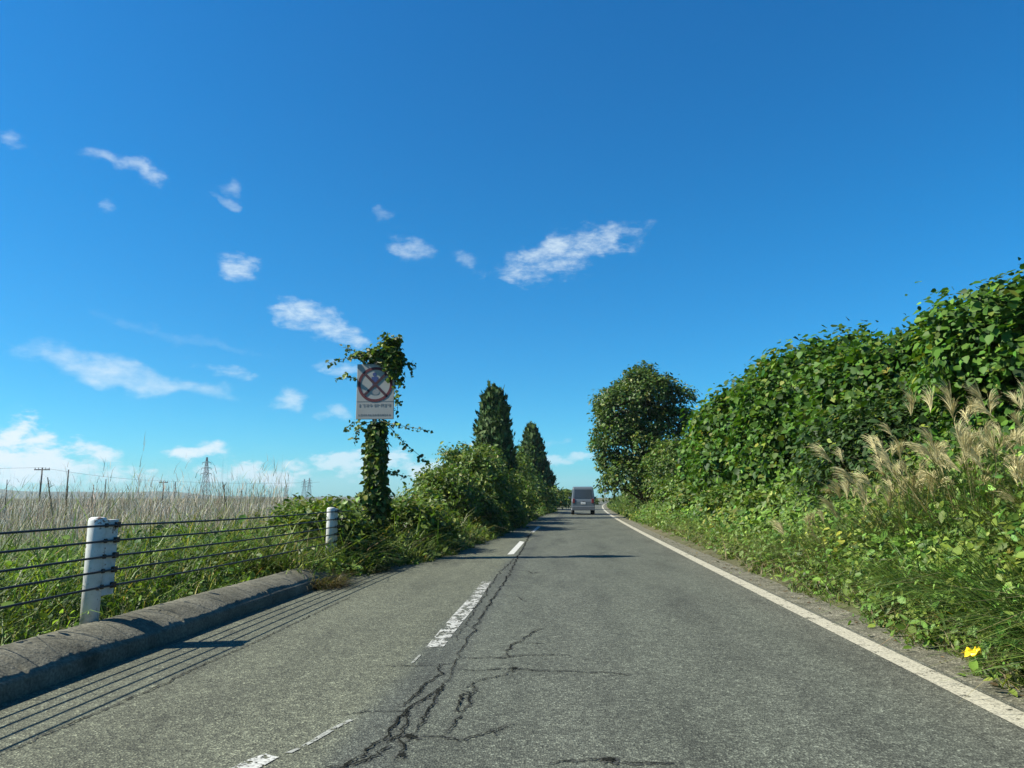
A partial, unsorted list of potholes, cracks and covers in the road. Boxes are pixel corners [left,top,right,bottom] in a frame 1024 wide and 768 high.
crack [550,757,682,765]
crack [323,531,626,768]
